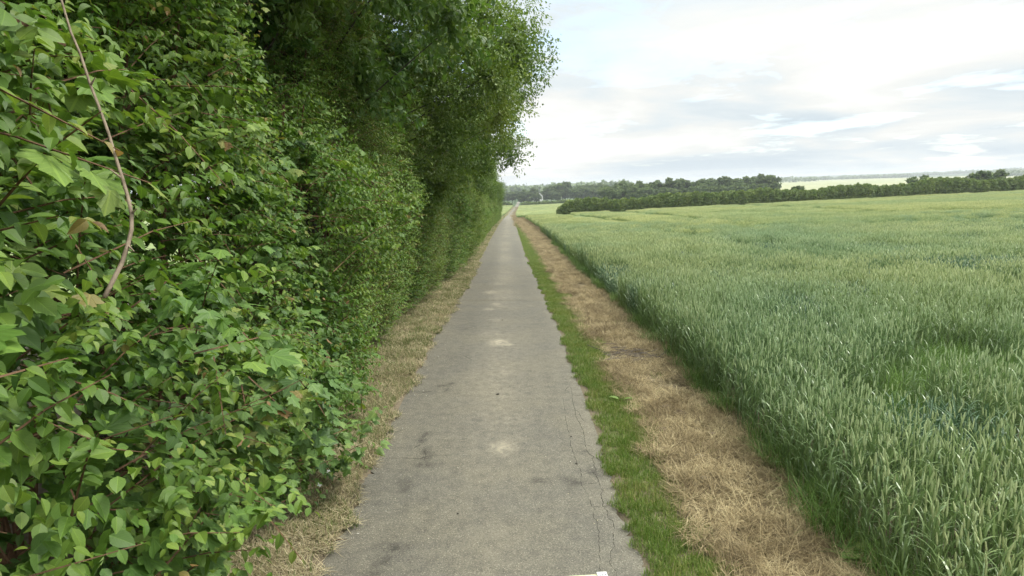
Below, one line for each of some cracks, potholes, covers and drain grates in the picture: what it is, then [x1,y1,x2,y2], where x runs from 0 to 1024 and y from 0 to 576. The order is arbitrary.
crack [564,387,617,575]
